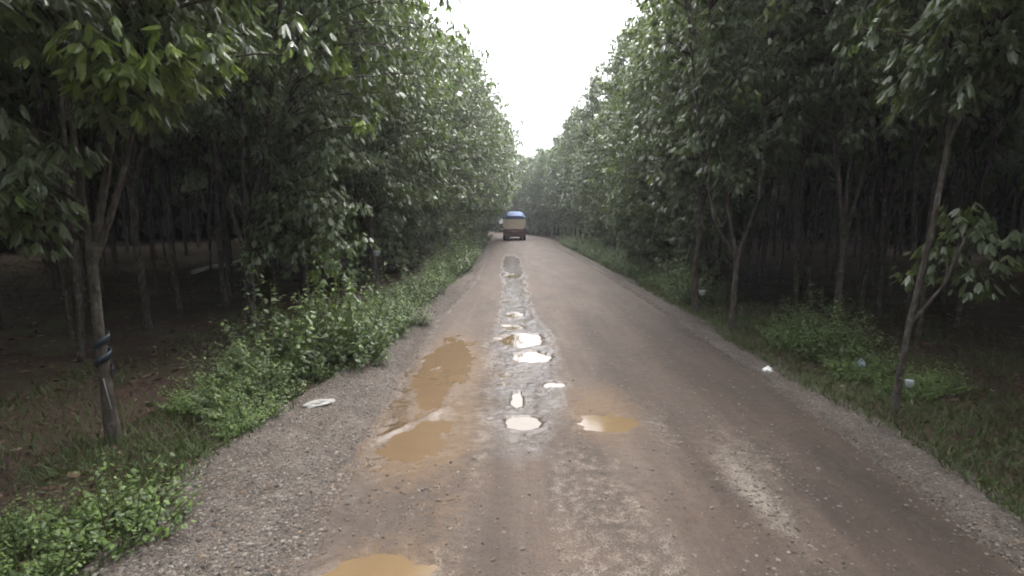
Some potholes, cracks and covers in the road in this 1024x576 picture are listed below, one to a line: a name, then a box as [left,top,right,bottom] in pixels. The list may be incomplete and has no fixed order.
pothole [509,389,525,411]
pothole [564,411,644,435]
pothole [299,546,455,576]
pothole [508,349,559,364]
pothole [491,332,551,349]
pothole [498,415,548,431]
pothole [390,332,492,427]
pothole [362,410,470,468]
